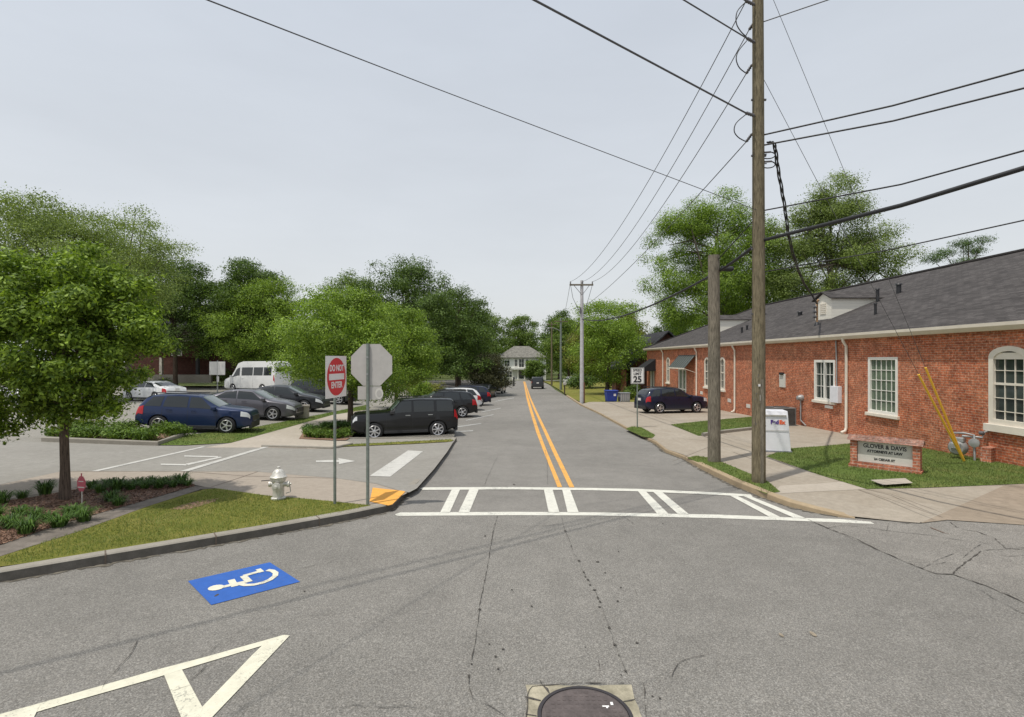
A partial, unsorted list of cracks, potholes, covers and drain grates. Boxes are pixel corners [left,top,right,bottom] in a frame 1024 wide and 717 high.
crack [471,518,497,663]
crack [526,569,707,717]
crack [817,522,1024,613]
manhole cover [525,680,642,717]
